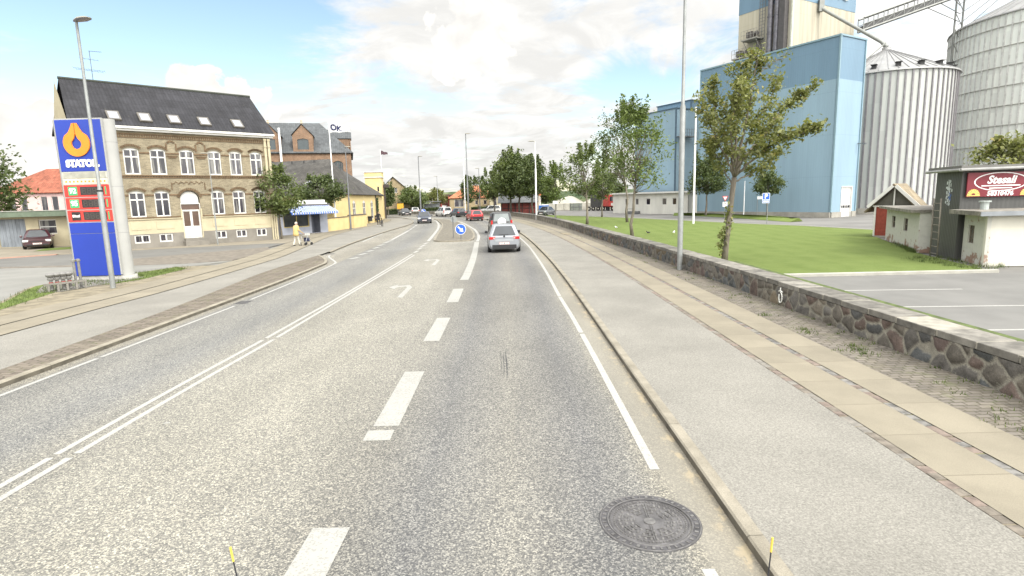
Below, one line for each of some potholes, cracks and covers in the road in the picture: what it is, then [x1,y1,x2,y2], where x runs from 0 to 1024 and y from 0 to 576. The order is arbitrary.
manhole cover [599,495,703,553]
